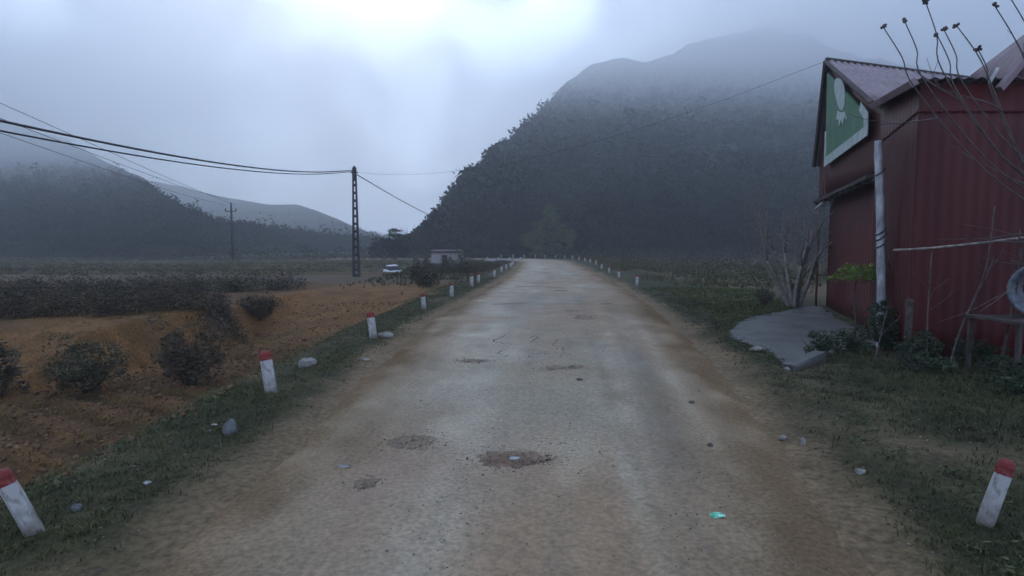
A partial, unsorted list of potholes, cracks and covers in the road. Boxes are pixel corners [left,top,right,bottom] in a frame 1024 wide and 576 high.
pothole [352,478,380,490]
pothole [476,451,550,469]
pothole [386,434,442,450]
